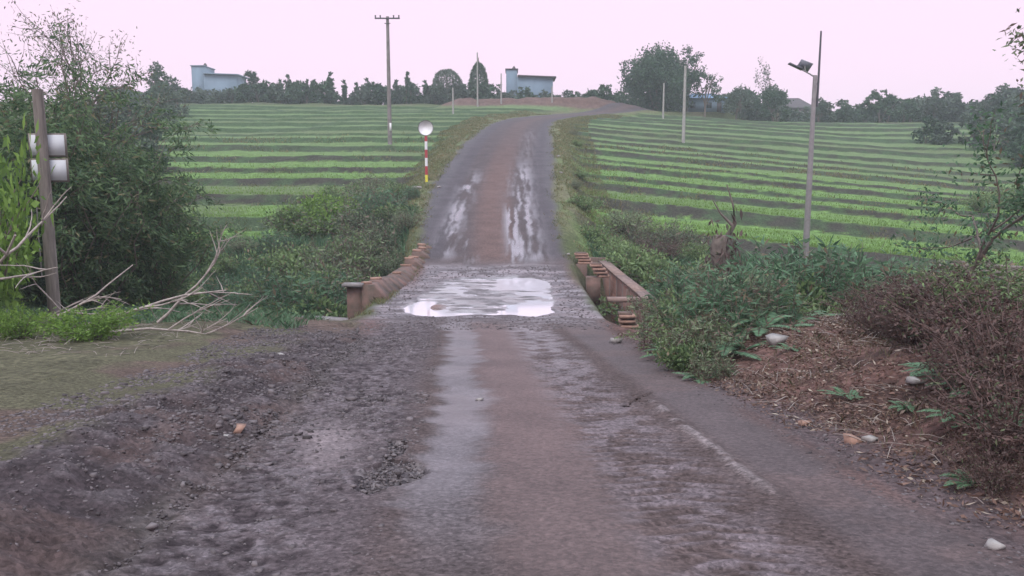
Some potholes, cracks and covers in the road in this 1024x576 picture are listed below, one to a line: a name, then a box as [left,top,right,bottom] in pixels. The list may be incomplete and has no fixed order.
pothole [399,275,560,317]
pothole [348,437,437,496]
